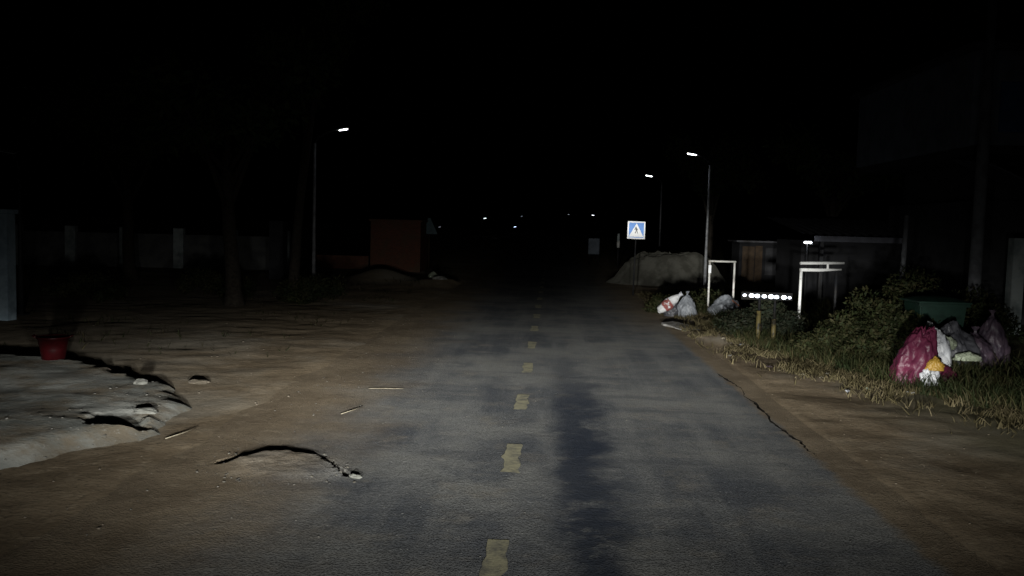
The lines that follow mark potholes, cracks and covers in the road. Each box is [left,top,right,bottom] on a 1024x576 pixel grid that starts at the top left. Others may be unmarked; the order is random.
crack [719,374,815,455]
